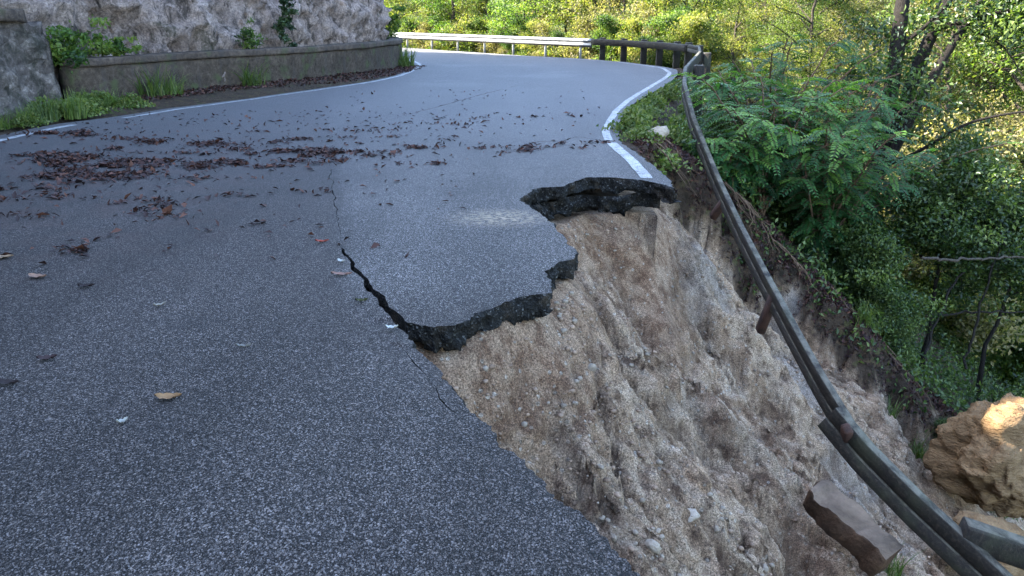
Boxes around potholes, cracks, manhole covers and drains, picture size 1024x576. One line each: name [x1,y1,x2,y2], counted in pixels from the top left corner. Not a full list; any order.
crack [329,159,446,406]
